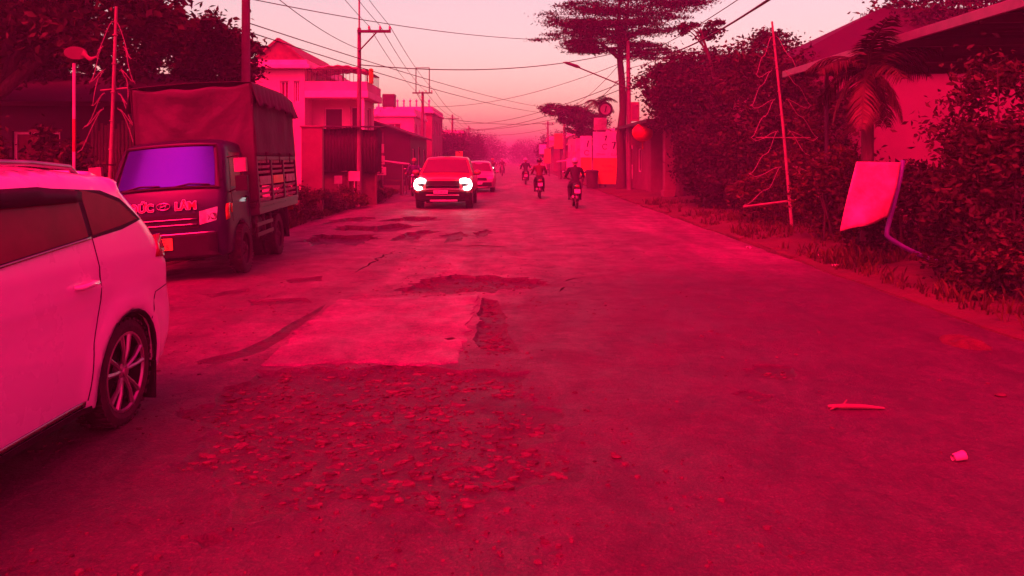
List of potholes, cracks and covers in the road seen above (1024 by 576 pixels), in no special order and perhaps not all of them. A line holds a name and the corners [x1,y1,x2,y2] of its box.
pothole [472,297,519,353]
pothole [440,231,467,243]
pothole [153,364,590,543]
pothole [332,223,424,232]
pothole [393,275,551,294]
pothole [390,230,440,241]
